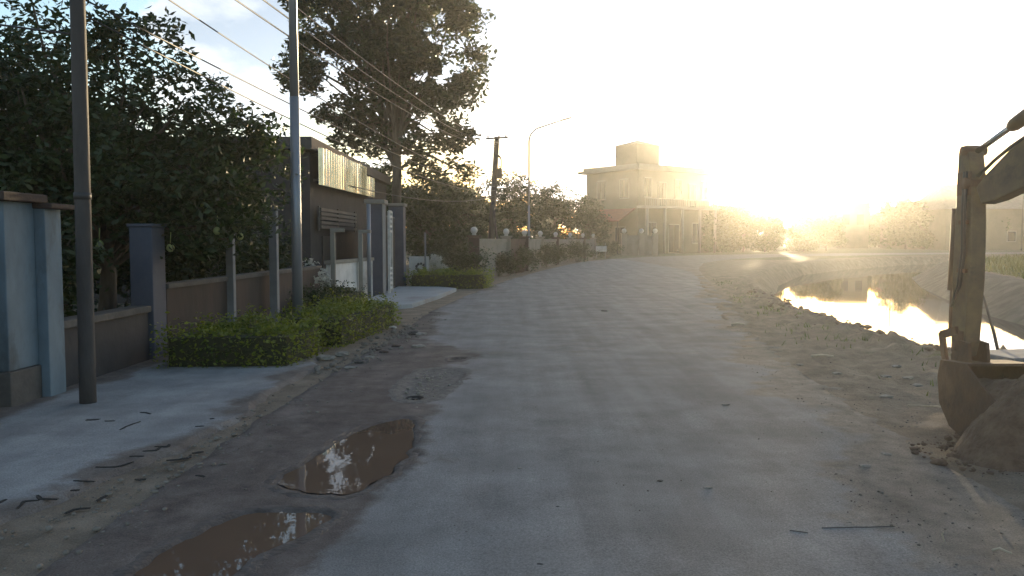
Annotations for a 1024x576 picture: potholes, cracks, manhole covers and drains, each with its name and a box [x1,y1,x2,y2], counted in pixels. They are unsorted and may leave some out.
pothole [262,415,425,500]
pothole [111,504,348,576]
pothole [388,367,471,404]
crack [0,412,205,514]
